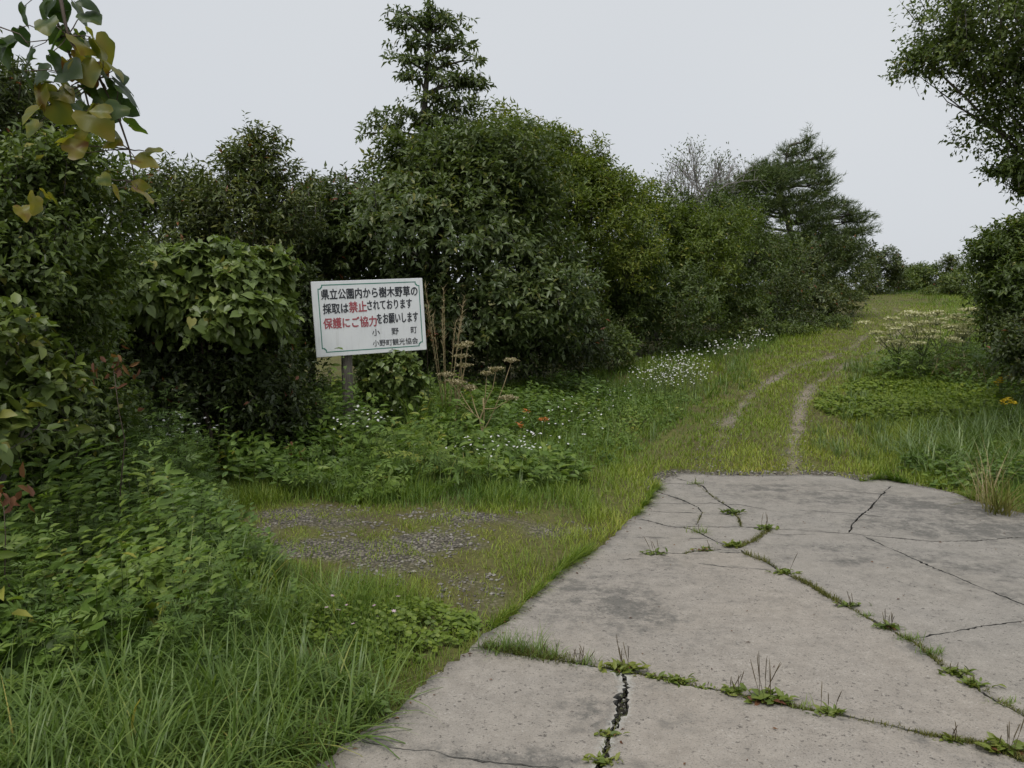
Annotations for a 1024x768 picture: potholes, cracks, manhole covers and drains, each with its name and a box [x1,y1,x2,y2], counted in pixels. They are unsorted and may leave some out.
crack [470,646,1022,768]
crack [357,739,559,768]
crack [623,478,1024,717]
